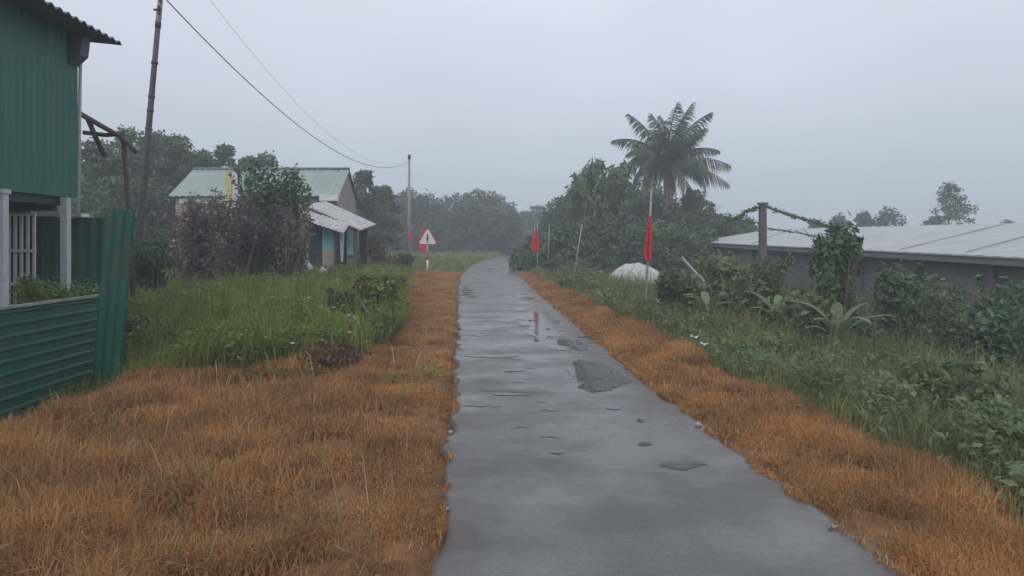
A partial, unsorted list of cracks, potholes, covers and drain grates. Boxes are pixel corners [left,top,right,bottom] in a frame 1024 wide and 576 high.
pothole [557,338,588,350]
crack [462,357,563,439]
pothole [572,359,633,392]
pothole [659,460,706,470]
